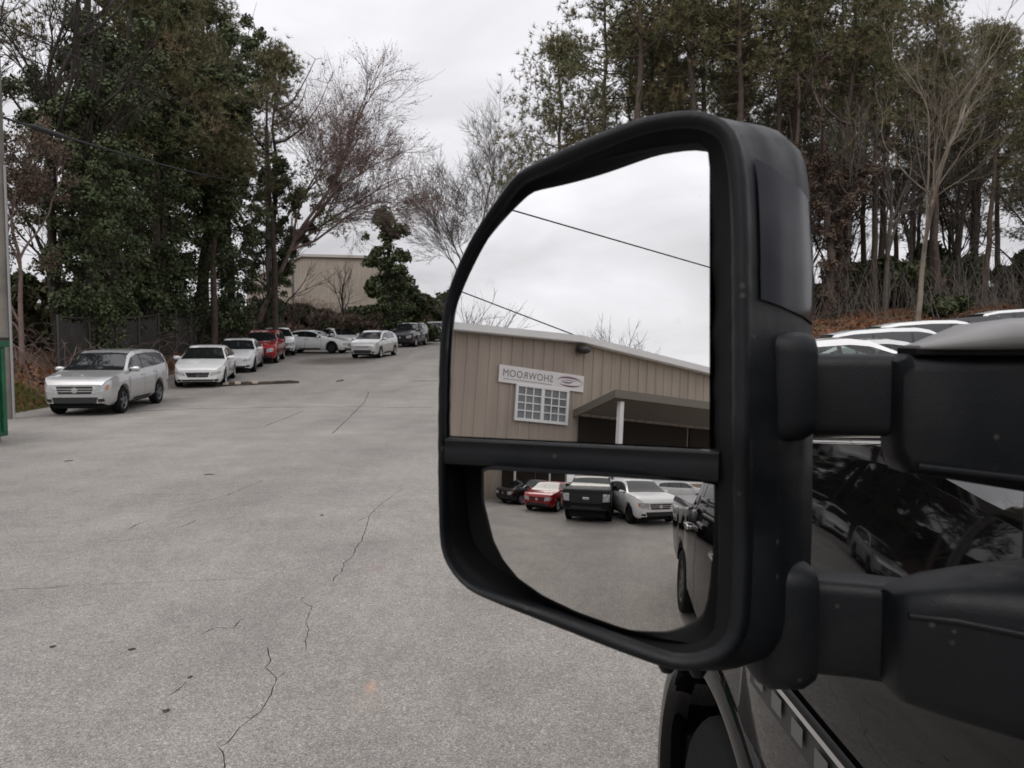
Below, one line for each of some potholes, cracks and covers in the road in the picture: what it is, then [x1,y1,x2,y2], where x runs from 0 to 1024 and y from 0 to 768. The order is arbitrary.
crack [218,647,292,768]
crack [333,490,400,581]
